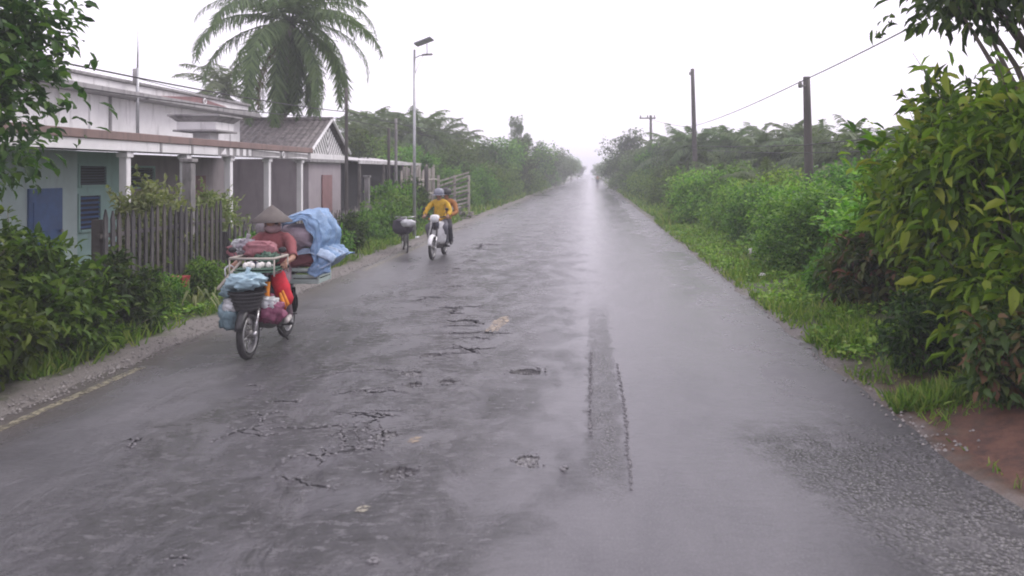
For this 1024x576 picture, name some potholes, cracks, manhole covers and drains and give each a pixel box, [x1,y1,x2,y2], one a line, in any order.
crack [411,295,509,355]
pothole [379,465,421,481]
pothole [510,452,545,468]
crack [210,368,408,490]
pothole [504,367,546,375]
